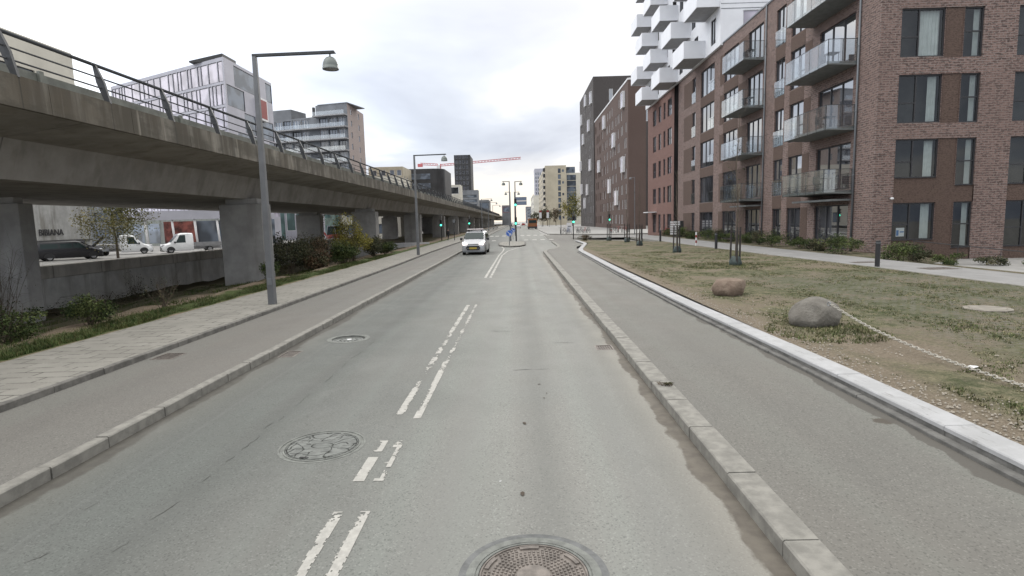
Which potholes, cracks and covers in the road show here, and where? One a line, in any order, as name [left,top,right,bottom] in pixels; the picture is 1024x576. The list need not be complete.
manhole cover [458,534,610,576]
manhole cover [962,305,1014,313]
manhole cover [277,430,366,463]
manhole cover [327,335,370,343]
